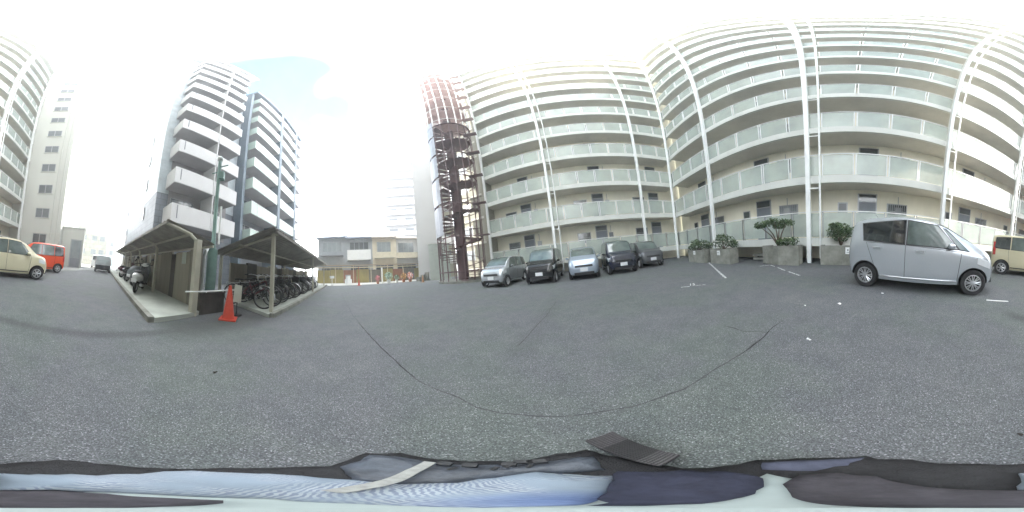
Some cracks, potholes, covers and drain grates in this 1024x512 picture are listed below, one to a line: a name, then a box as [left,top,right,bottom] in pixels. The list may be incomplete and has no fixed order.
crack [342,295,779,417]
